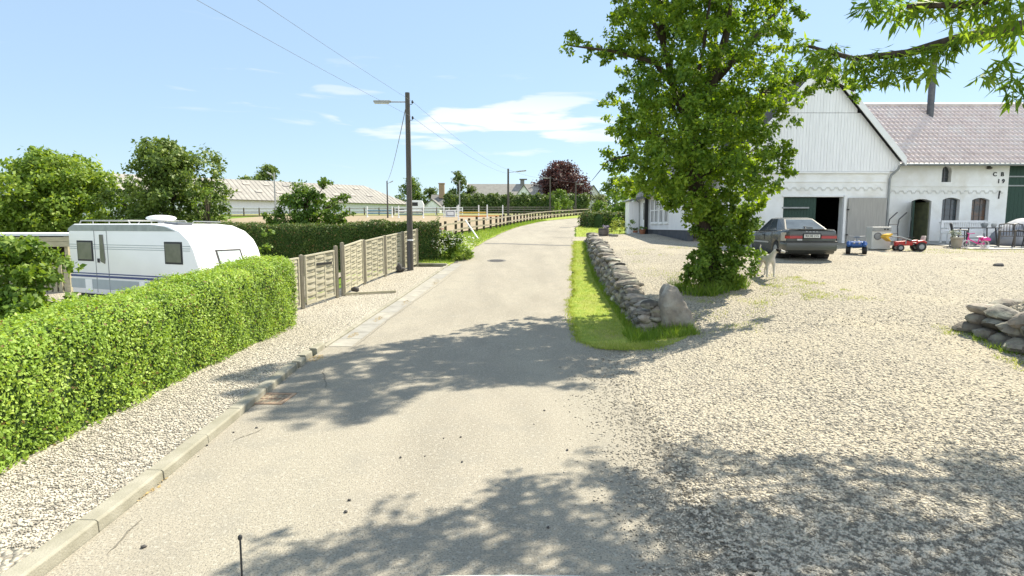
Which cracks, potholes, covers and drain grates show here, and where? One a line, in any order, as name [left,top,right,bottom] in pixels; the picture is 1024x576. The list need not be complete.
drain grate [254,393,297,405]
